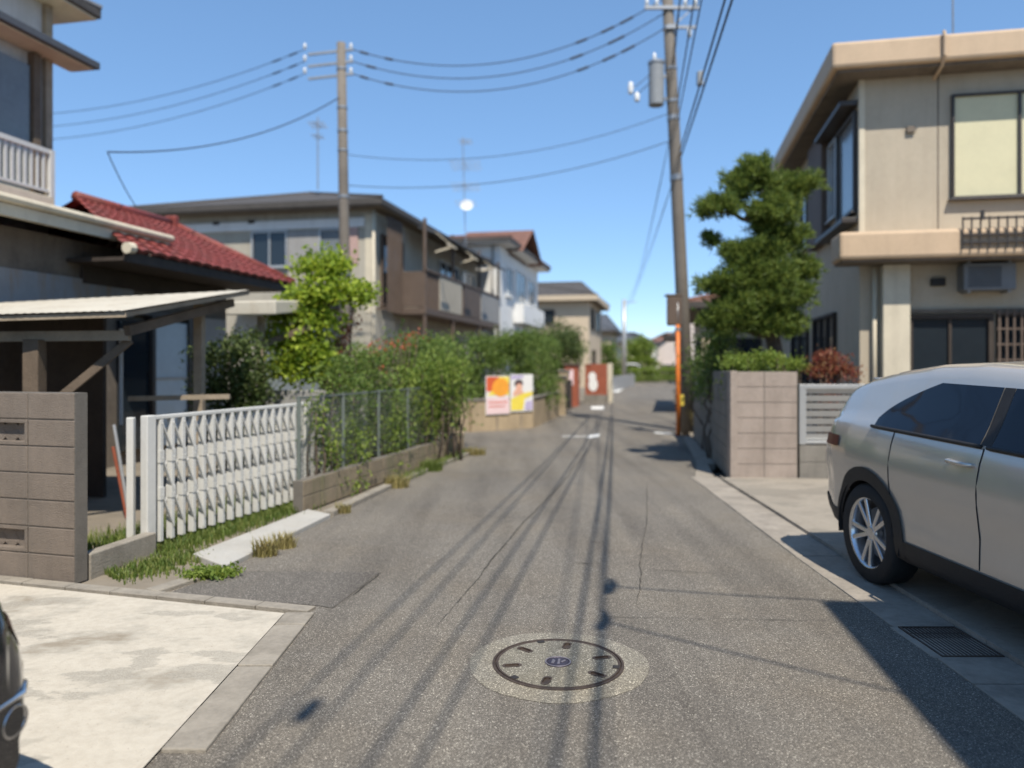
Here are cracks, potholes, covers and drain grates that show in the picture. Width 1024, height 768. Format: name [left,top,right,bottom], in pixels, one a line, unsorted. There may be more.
manhole cover [470,633,649,703]
crack [636,484,721,603]
drain grate [898,626,1005,657]
